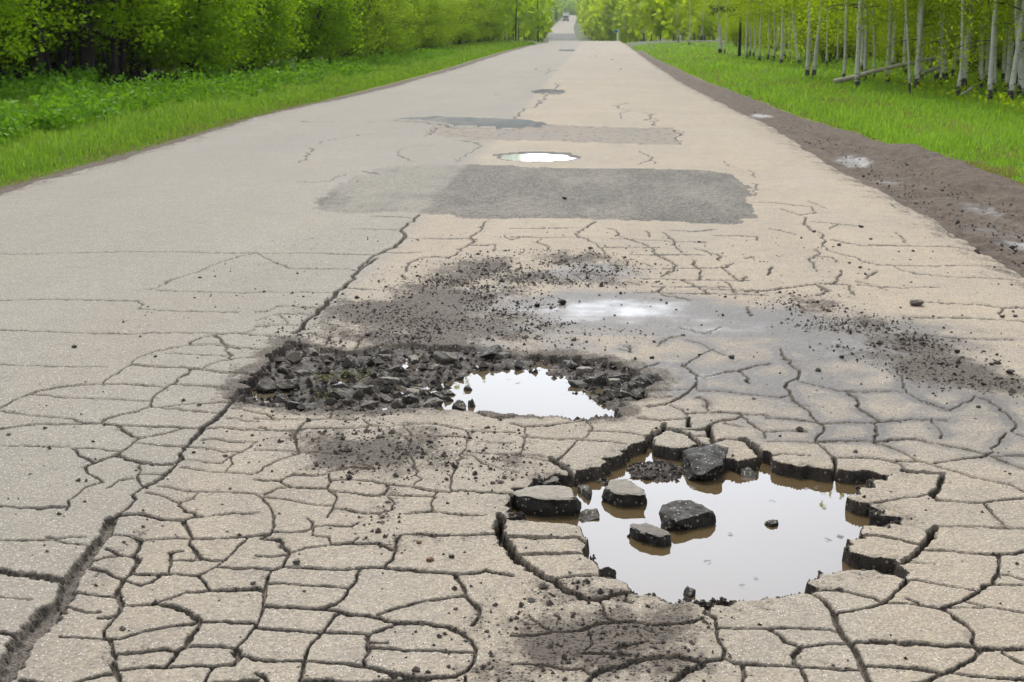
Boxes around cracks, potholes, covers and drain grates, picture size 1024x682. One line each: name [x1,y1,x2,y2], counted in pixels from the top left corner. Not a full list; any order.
pothole [223,340,665,421]
crack [291,68,563,185]
crack [603,98,685,166]
pothole [492,152,581,162]
pothole [505,438,910,611]
crack [0,160,1024,682]
